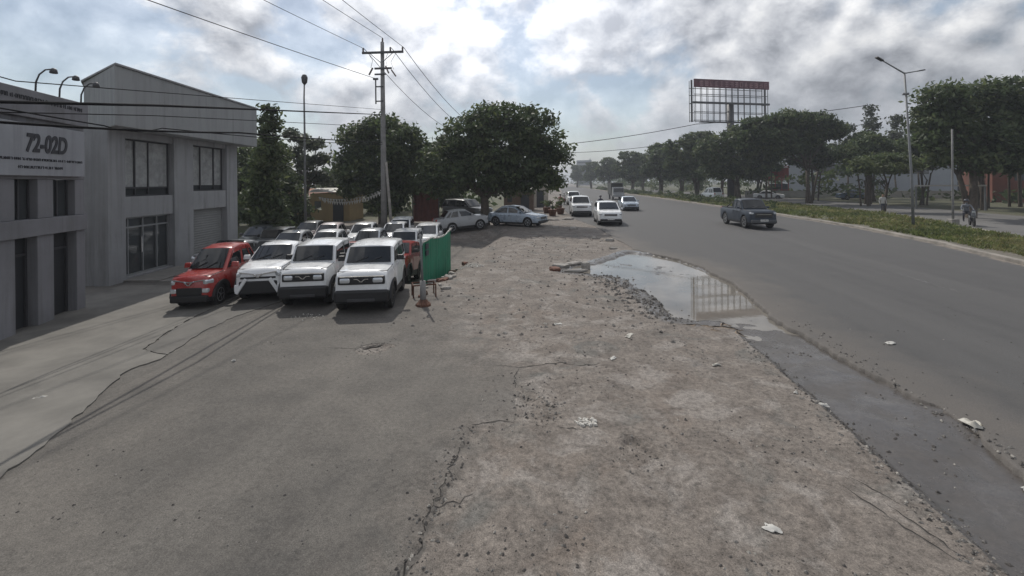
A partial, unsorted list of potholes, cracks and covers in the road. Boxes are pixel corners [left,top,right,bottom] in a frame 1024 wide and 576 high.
pothole [566,251,768,322]
crack [472,420,582,430]
crack [500,362,597,388]
crack [402,446,473,576]
crack [844,476,977,565]
pothole [355,343,395,355]
